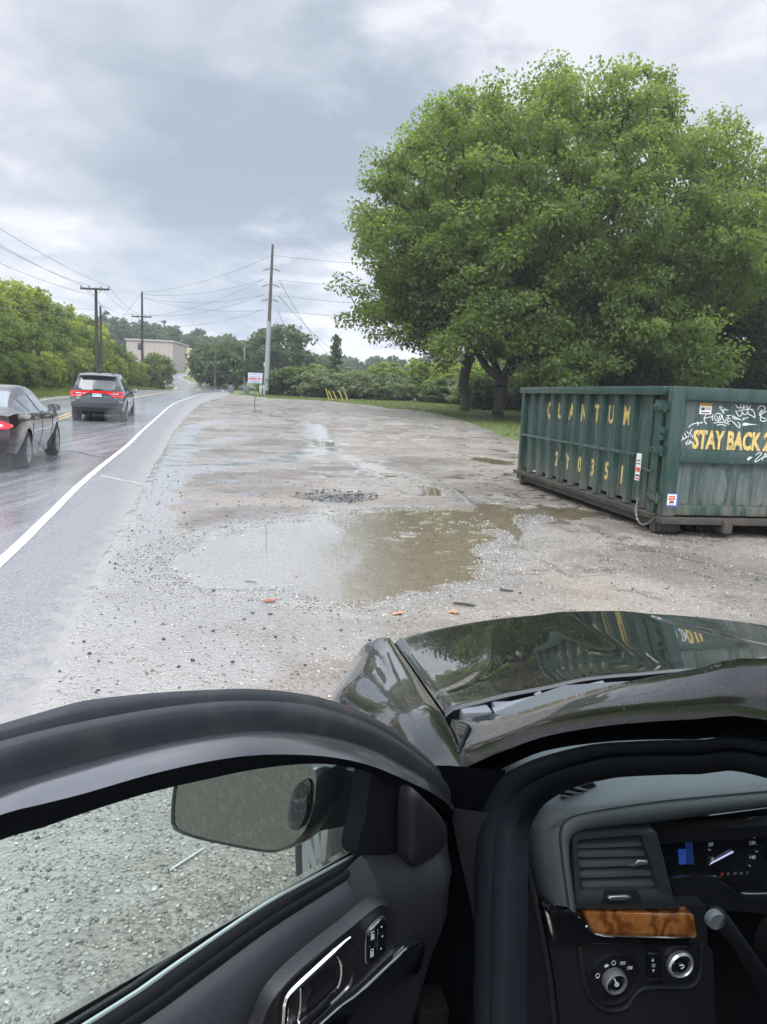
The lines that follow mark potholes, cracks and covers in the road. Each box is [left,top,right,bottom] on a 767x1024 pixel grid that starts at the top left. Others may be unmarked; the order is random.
pothole [291,488,381,503]
pothole [462,454,518,466]
pothole [159,502,549,612]
pothole [395,483,454,497]
